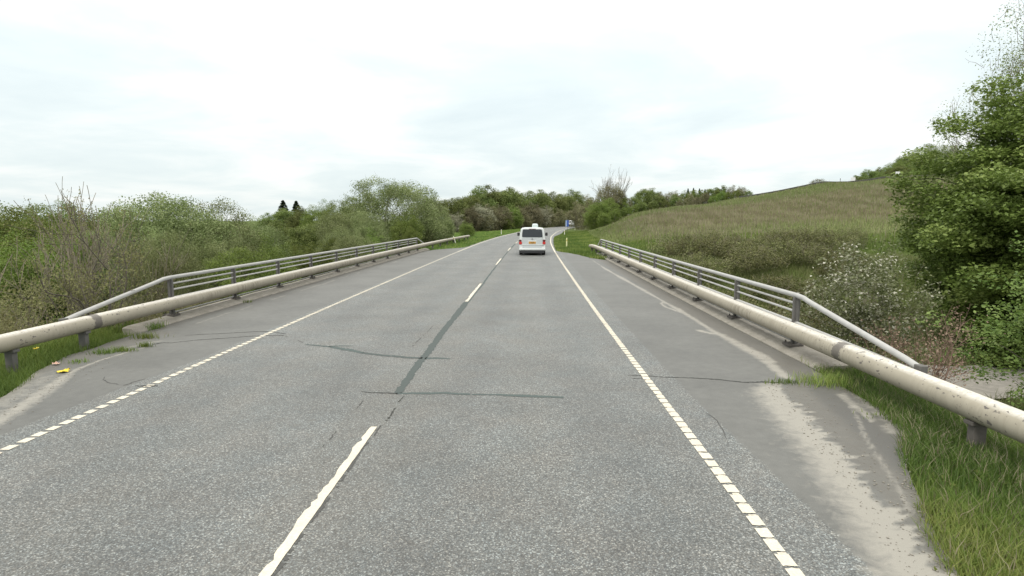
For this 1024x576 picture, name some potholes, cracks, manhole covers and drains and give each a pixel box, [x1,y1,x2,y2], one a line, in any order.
crack [633,375,778,383]
